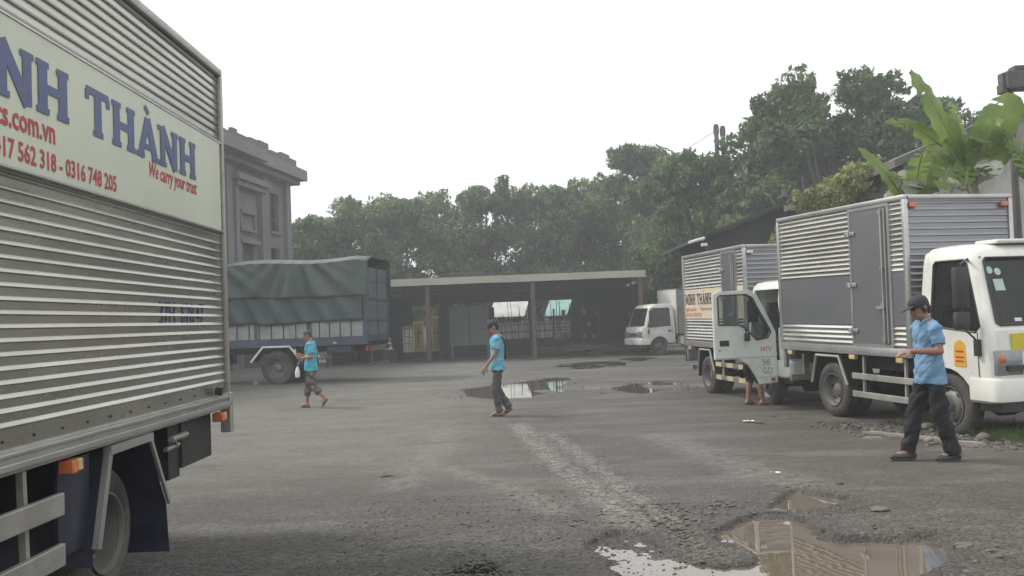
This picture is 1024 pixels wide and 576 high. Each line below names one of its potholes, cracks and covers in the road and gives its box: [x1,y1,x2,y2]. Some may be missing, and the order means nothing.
pothole [542,361,655,370]
pothole [435,377,590,402]
pothole [595,381,700,395]
pothole [558,509,996,576]
pothole [744,485,876,521]
